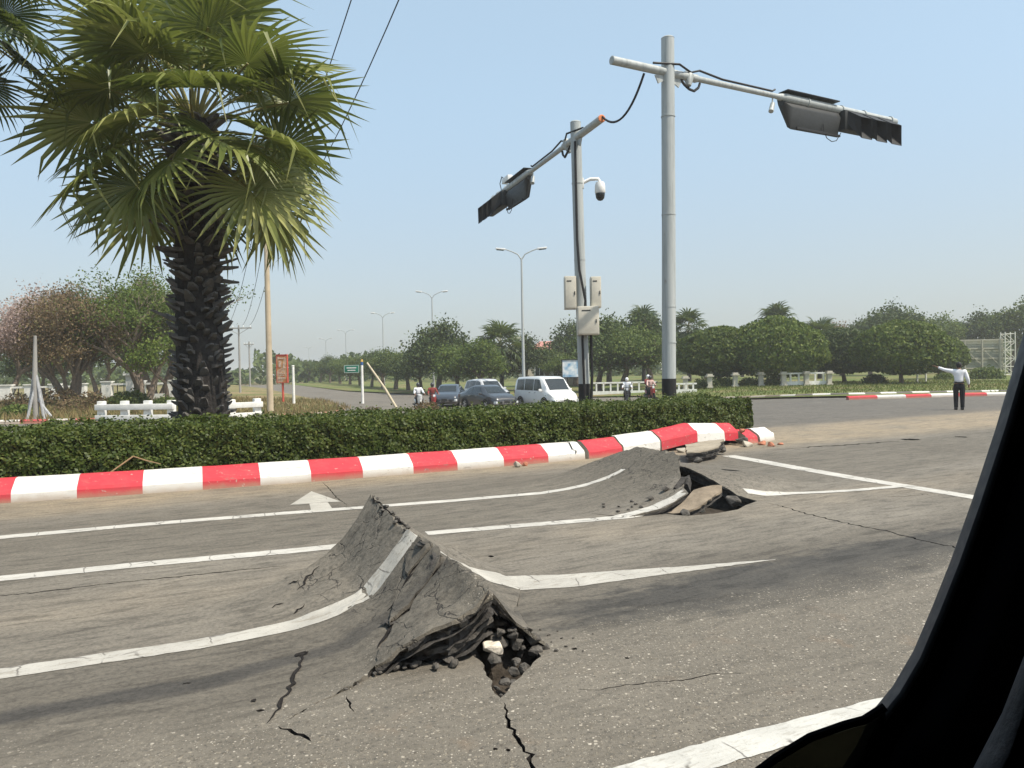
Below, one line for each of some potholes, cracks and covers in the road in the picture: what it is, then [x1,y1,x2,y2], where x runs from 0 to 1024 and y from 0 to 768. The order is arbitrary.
crack [267,652,311,741]
crack [790,441,896,449]
crack [504,703,535,768]
crack [770,503,955,548]
crack [576,673,732,690]
crack [377,558,441,648]
pothole [480,647,541,696]
